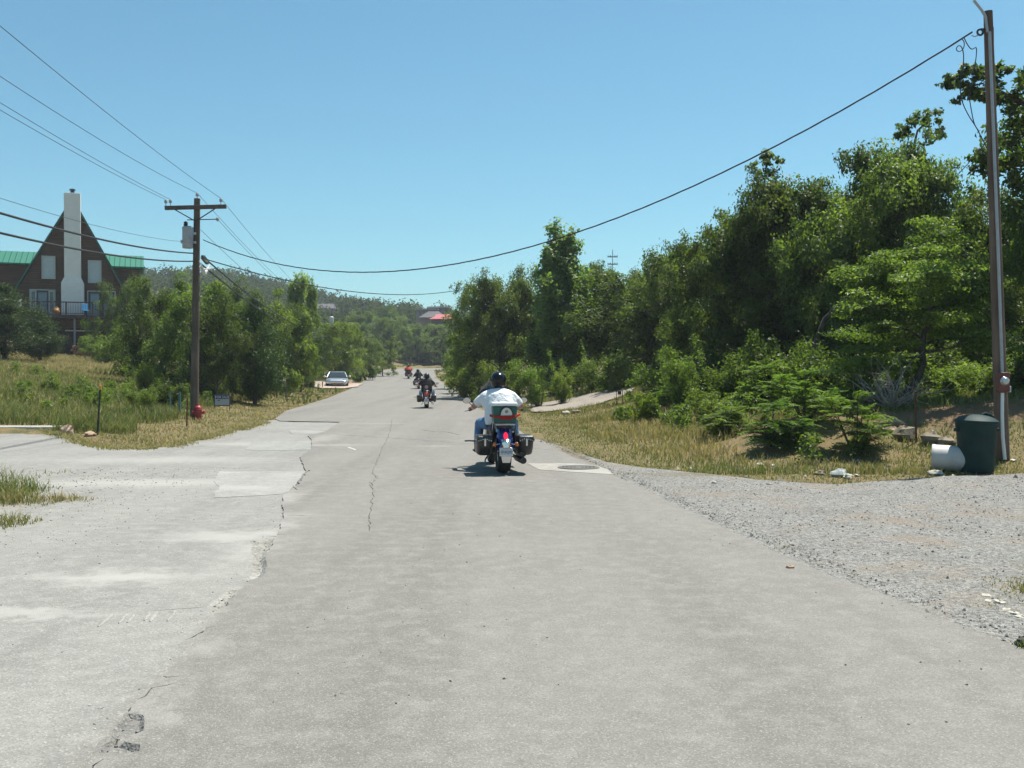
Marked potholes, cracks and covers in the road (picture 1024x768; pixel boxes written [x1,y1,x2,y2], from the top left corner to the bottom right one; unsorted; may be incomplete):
pothole [99,714,145,753]
crack [367,426,392,531]
